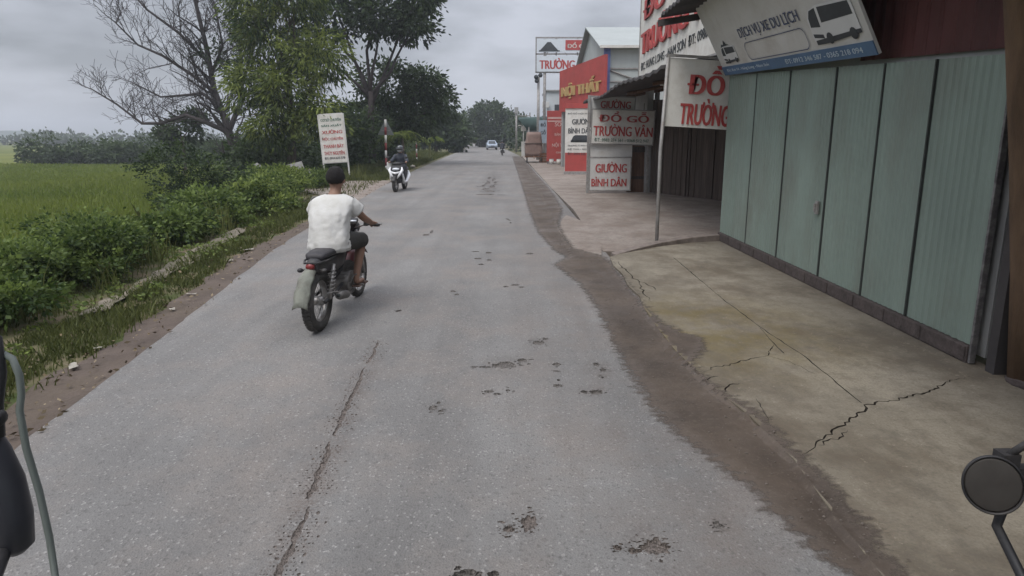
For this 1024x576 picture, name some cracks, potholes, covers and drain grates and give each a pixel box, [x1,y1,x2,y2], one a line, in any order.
pothole [449,566,499,576]
pothole [470,358,534,369]
pothole [497,507,542,538]
pothole [610,531,682,563]
crack [808,379,957,452]
crack [707,343,812,424]
